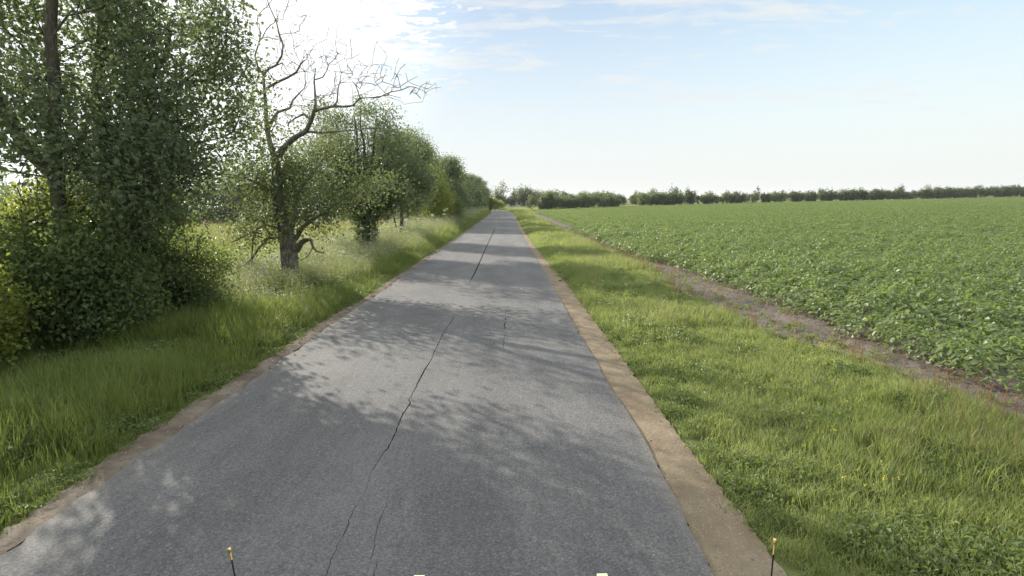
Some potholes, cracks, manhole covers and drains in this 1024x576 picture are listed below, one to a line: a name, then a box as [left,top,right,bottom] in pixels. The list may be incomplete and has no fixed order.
crack [325,316,455,576]
crack [469,217,500,283]
